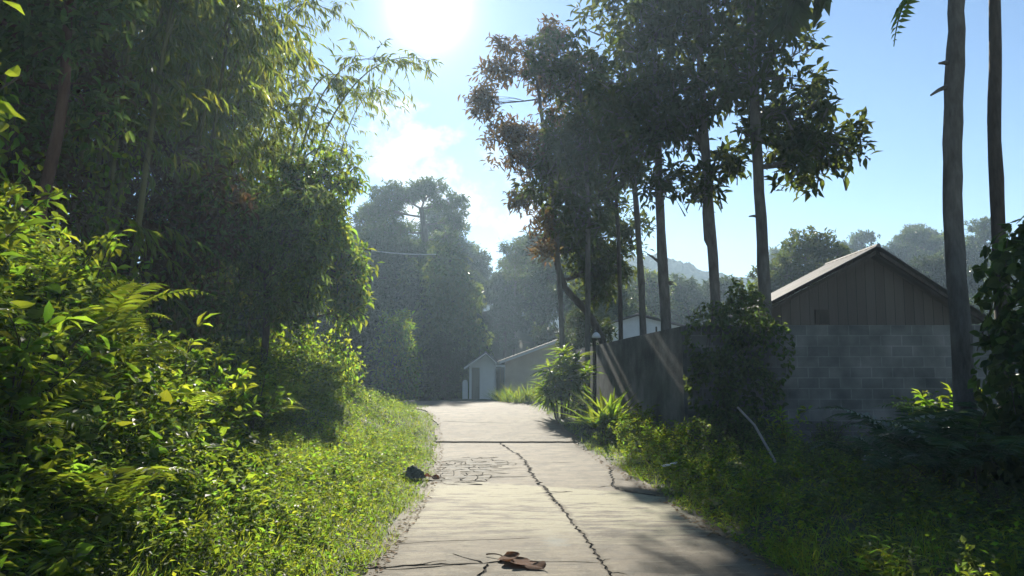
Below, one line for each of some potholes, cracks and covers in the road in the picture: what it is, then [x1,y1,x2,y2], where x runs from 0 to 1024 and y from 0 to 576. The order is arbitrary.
crack [366,443,623,576]
crack [604,467,659,496]
